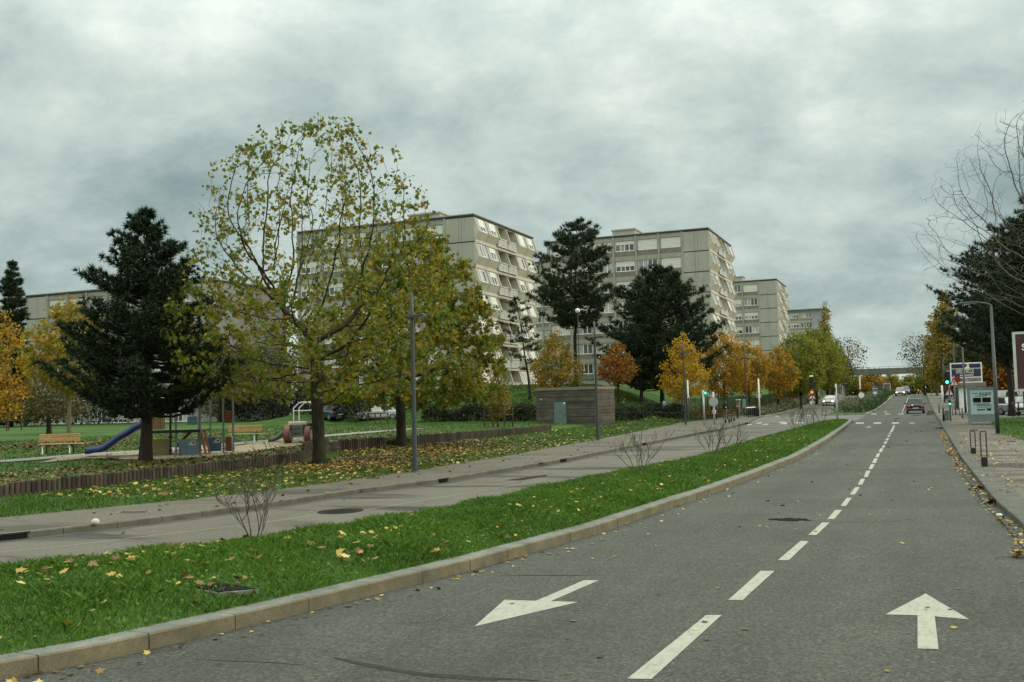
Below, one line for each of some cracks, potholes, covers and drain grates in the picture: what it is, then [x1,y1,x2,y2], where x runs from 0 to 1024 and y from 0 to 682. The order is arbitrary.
drain grate [0,531,30,541]
